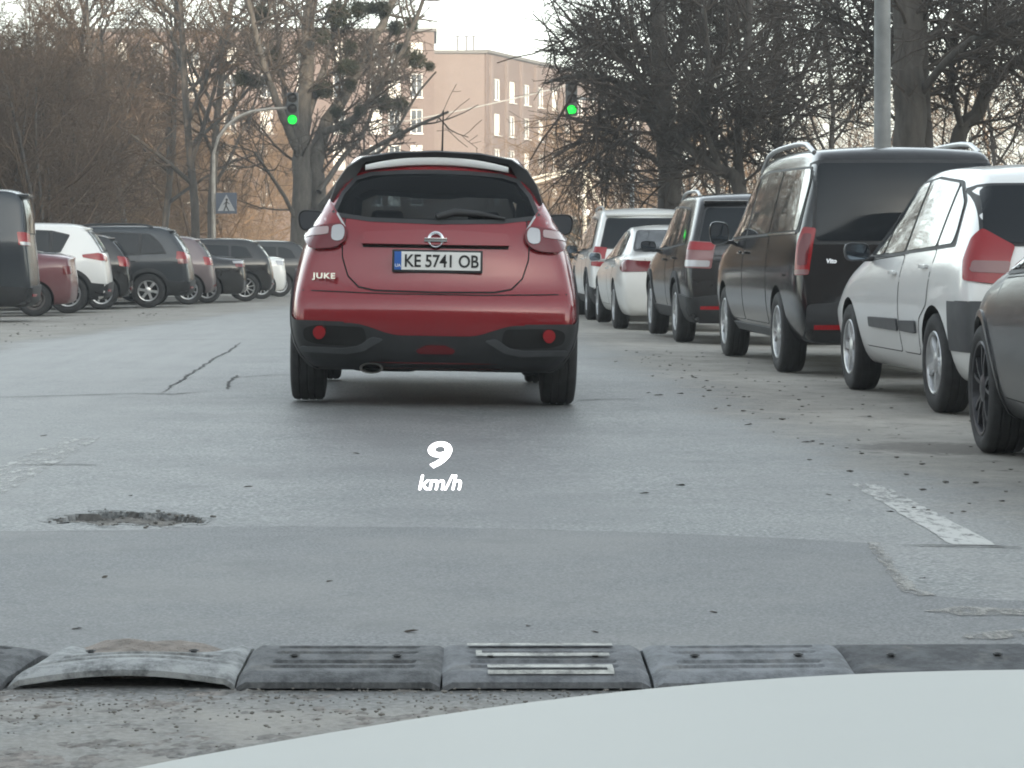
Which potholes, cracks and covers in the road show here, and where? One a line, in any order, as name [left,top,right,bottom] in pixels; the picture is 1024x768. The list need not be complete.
crack [15,339,284,397]
pothole [39,508,216,528]
